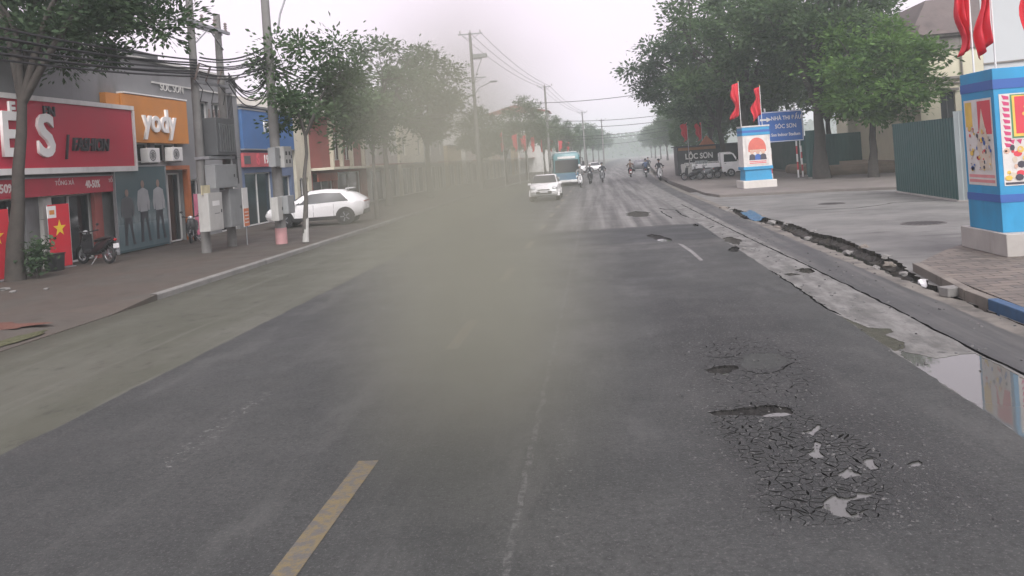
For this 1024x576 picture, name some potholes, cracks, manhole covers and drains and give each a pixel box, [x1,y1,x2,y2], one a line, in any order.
pothole [705,365,738,375]
pothole [708,405,793,417]
crack [706,400,894,526]
pothole [646,234,672,242]
crack [769,270,841,315]
